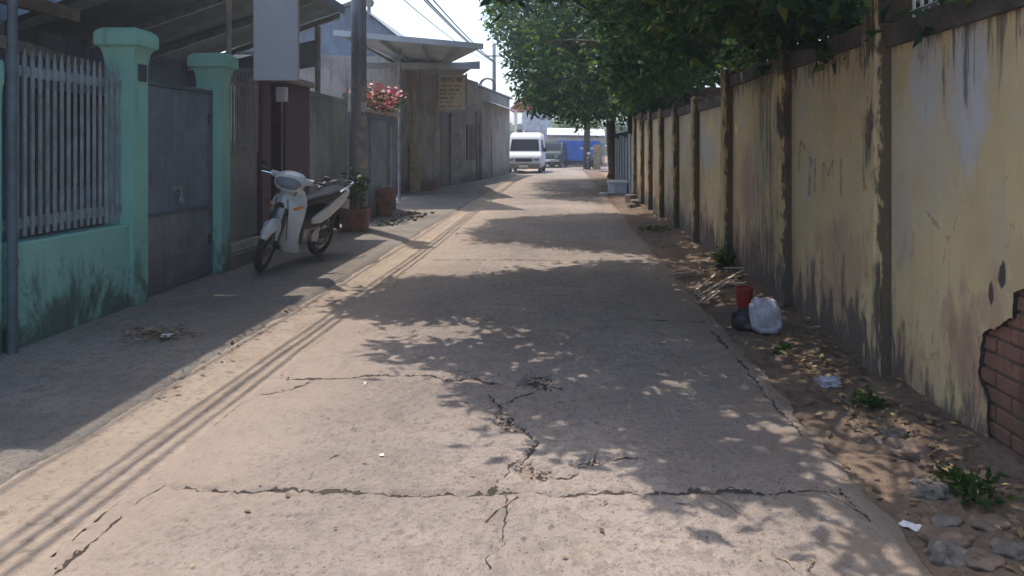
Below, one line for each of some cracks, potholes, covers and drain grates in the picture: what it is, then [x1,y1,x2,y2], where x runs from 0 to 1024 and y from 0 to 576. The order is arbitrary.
crack [175,371,871,570]
crack [54,485,165,575]
